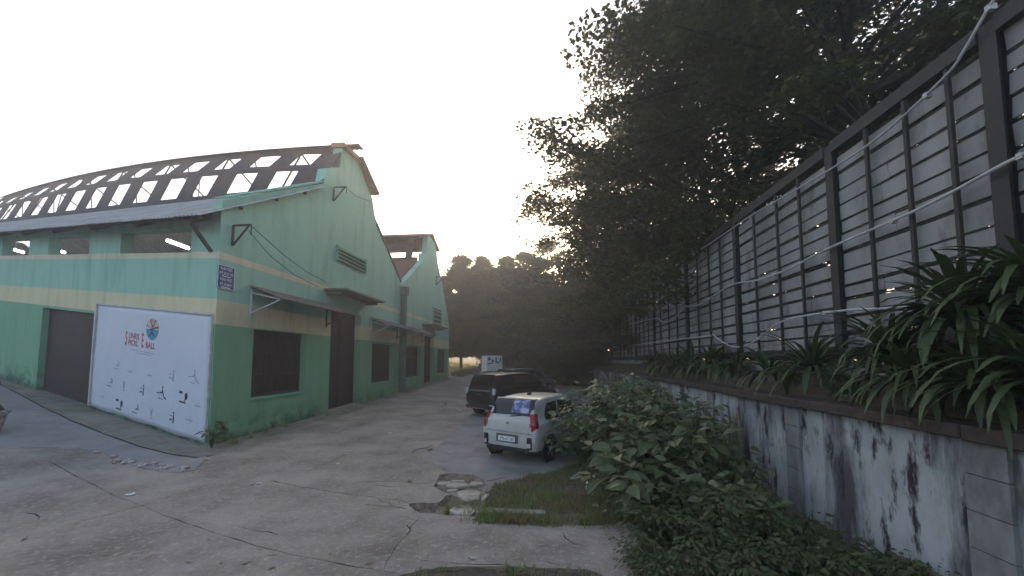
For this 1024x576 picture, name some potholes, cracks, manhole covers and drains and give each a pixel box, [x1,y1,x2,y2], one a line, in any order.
crack [0,378,453,574]
pothole [434,473,486,493]
pothole [409,495,477,516]
